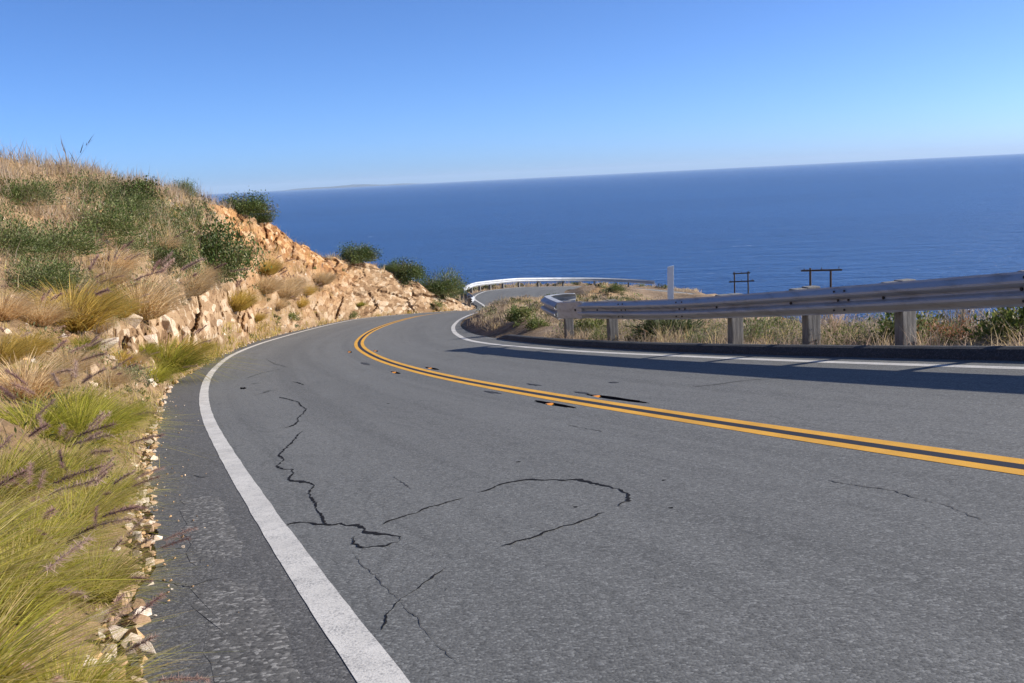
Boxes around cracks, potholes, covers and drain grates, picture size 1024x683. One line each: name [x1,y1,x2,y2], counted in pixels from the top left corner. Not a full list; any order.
crack [384,479,631,545]
crack [826,479,979,518]
crack [353,551,458,661]
